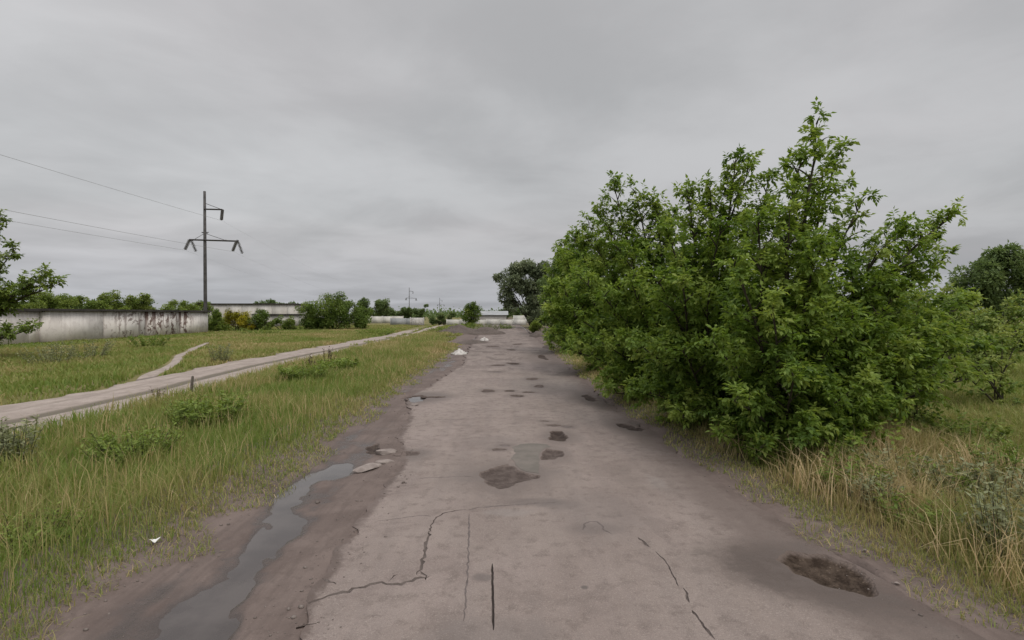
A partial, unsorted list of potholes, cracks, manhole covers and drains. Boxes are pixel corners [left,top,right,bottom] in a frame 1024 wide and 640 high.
pothole [616,423,646,431]
crack [583,521,611,534]
pothole [540,448,564,460]
pothole [775,551,879,598]
pothole [479,464,541,489]
crack [309,502,556,621]
crack [638,538,715,639]
pothole [548,431,569,441]
